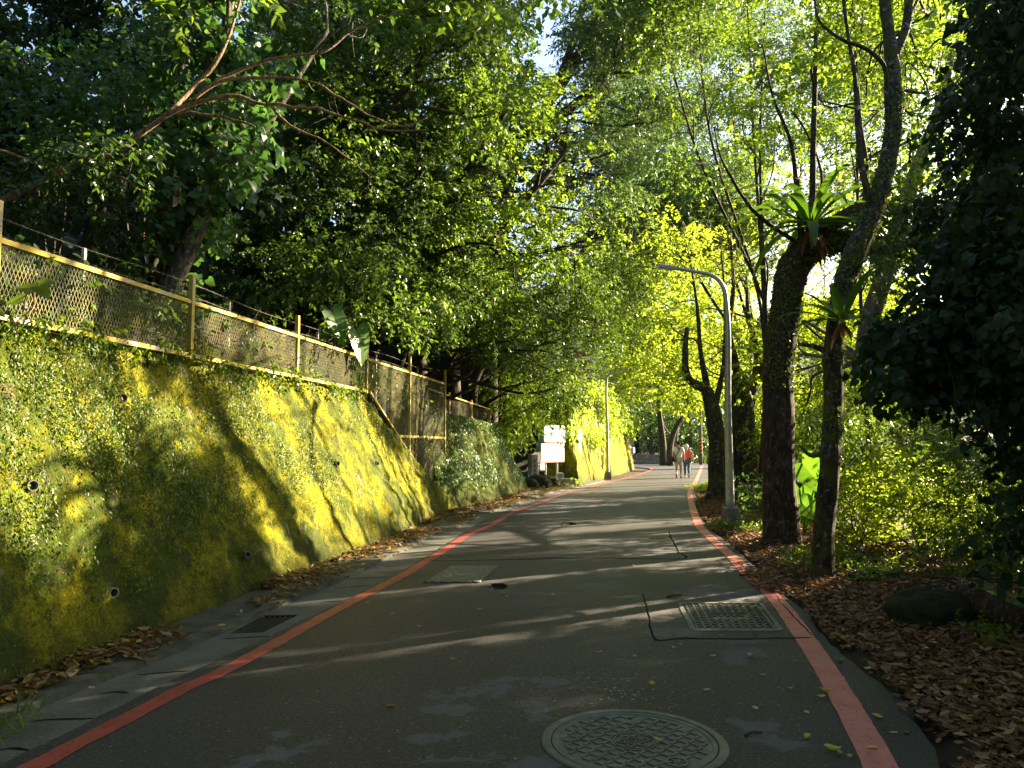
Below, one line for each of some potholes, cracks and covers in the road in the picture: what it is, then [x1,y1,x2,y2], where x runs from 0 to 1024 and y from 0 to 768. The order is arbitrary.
drain grate [229,615,297,634]
manhole cover [541,709,730,768]
utility cover [424,565,499,583]
